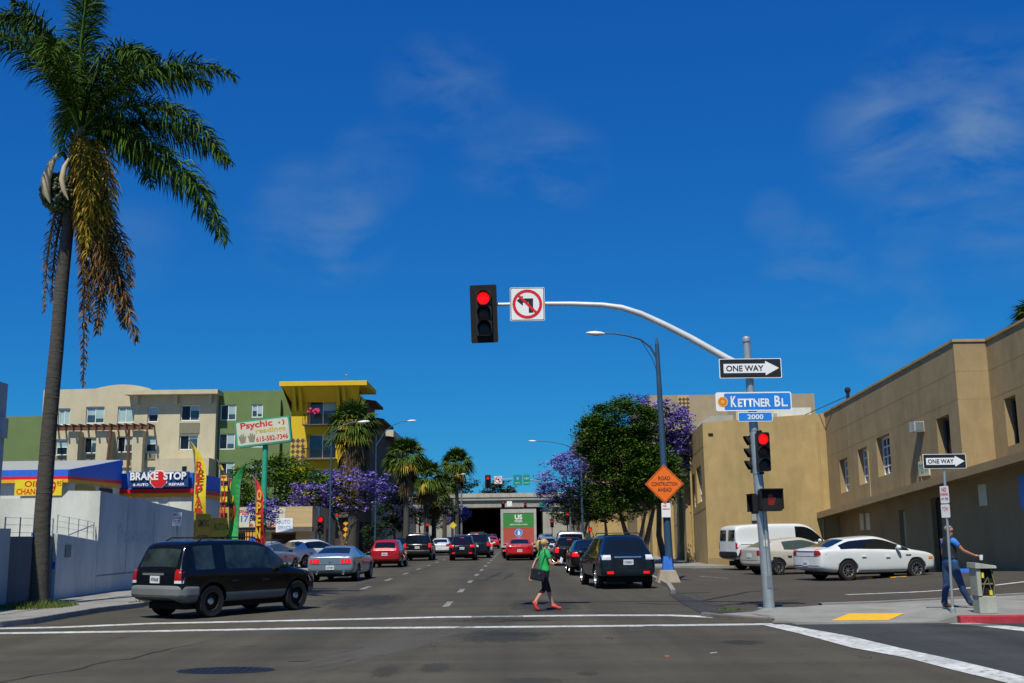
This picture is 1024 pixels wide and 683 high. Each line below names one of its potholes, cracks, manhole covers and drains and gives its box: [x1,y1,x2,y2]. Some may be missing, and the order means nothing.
crack [0,642,201,683]
